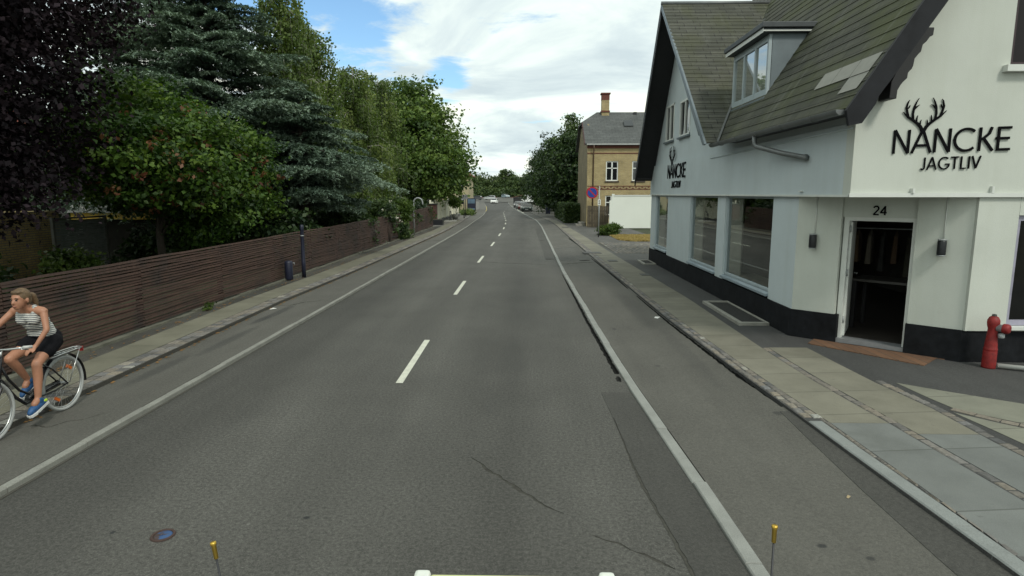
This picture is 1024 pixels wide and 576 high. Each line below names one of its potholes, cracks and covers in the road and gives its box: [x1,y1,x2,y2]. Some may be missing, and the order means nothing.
crack [590,534,674,569]
manhole cover [150,528,176,542]
crack [472,458,561,513]
